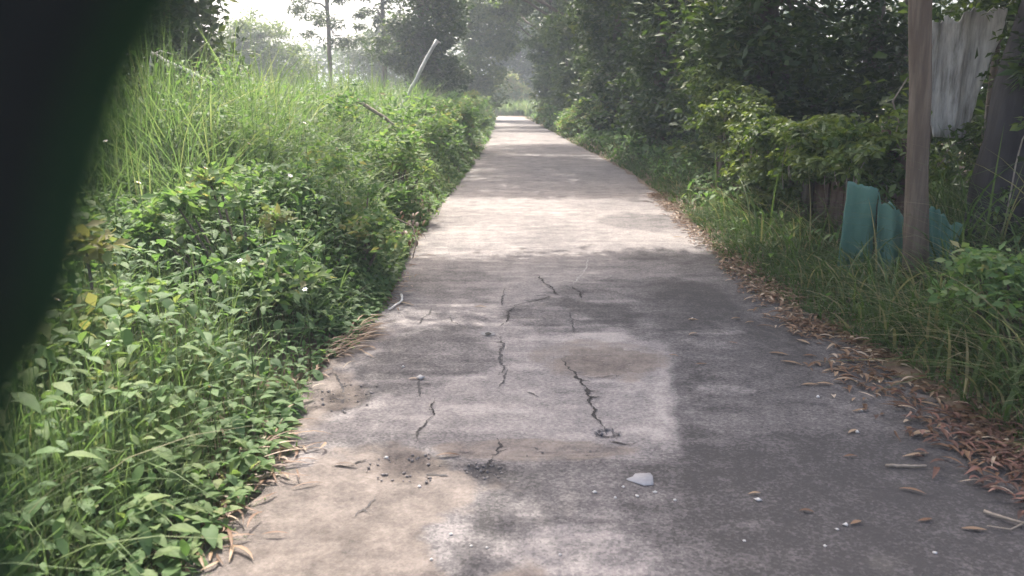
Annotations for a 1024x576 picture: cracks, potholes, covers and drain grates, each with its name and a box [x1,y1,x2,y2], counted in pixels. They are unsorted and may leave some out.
crack [498,275,582,384]
crack [415,379,435,442]
pothole [458,461,508,481]
crack [561,359,635,444]
crack [481,438,507,474]
